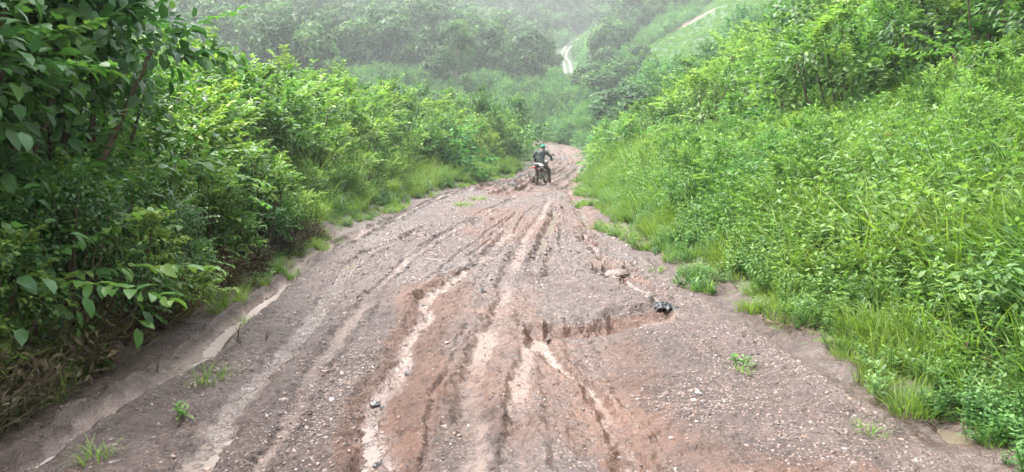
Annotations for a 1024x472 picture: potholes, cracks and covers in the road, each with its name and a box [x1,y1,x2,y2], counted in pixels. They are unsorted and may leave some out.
pothole [521,297,680,342]
